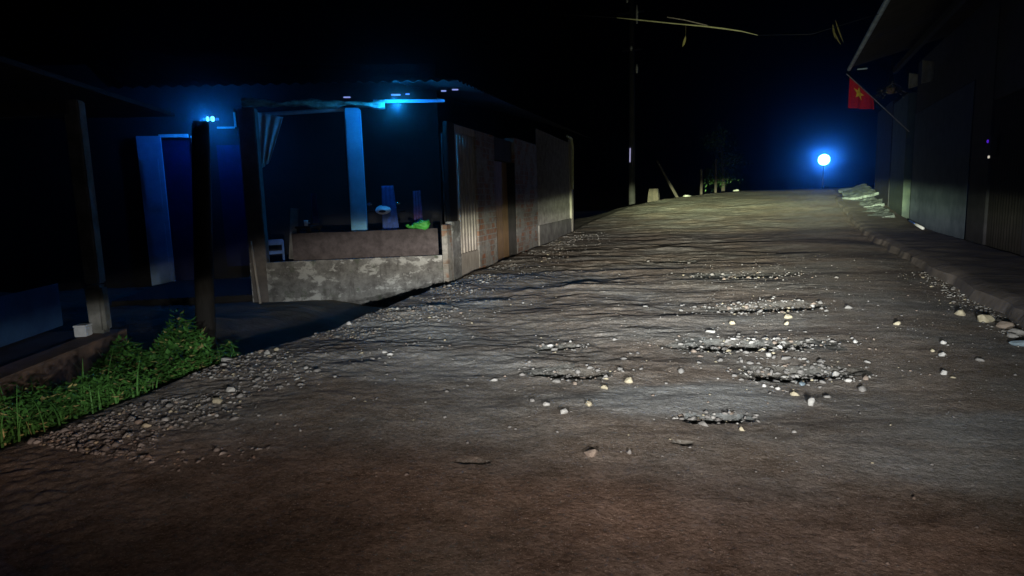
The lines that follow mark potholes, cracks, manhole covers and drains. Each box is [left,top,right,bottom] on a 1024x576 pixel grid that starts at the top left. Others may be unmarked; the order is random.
pothole [662,337,861,354]
pothole [678,412,759,425]
pothole [521,363,614,380]
pothole [737,364,872,385]
pothole [700,300,833,313]
pothole [520,343,593,352]
